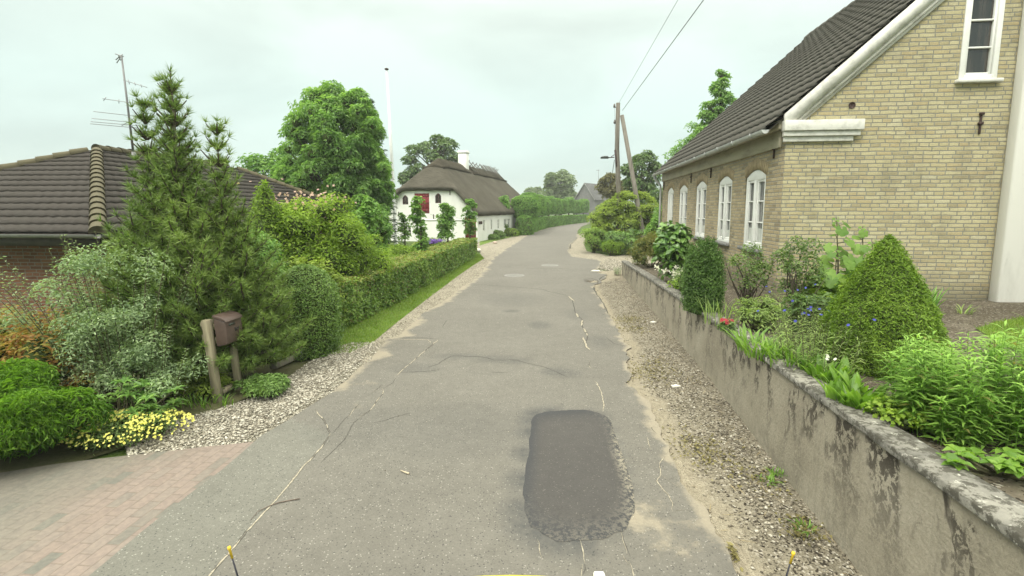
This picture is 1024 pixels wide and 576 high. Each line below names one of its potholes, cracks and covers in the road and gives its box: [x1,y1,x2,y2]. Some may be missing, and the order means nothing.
crack [647,427,679,512]
crack [420,356,563,375]
